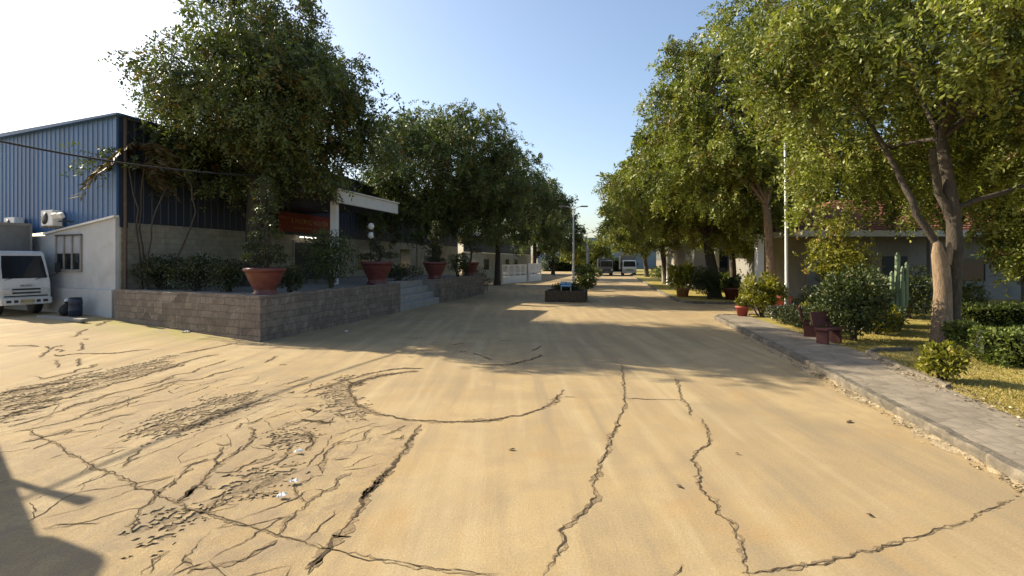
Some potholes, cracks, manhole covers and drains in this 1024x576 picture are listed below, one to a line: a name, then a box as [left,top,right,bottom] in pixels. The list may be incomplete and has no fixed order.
crack [0,319,748,576]
